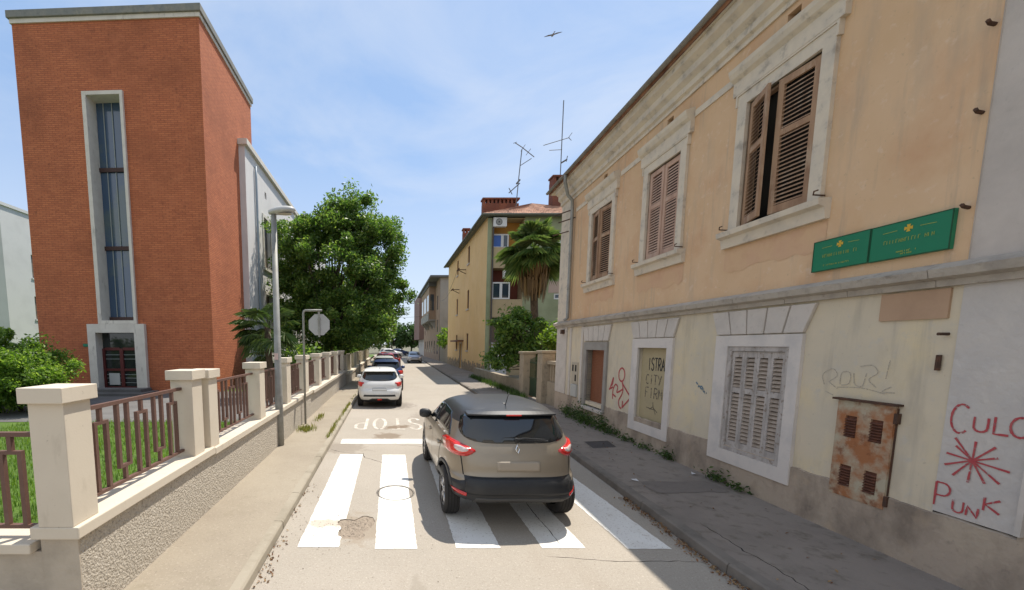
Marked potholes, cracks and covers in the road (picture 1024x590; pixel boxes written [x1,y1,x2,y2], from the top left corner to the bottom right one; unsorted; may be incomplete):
manhole cover [376,485,415,501]
crack [703,525,809,590]
crack [527,504,685,562]
pothole [338,516,375,540]
